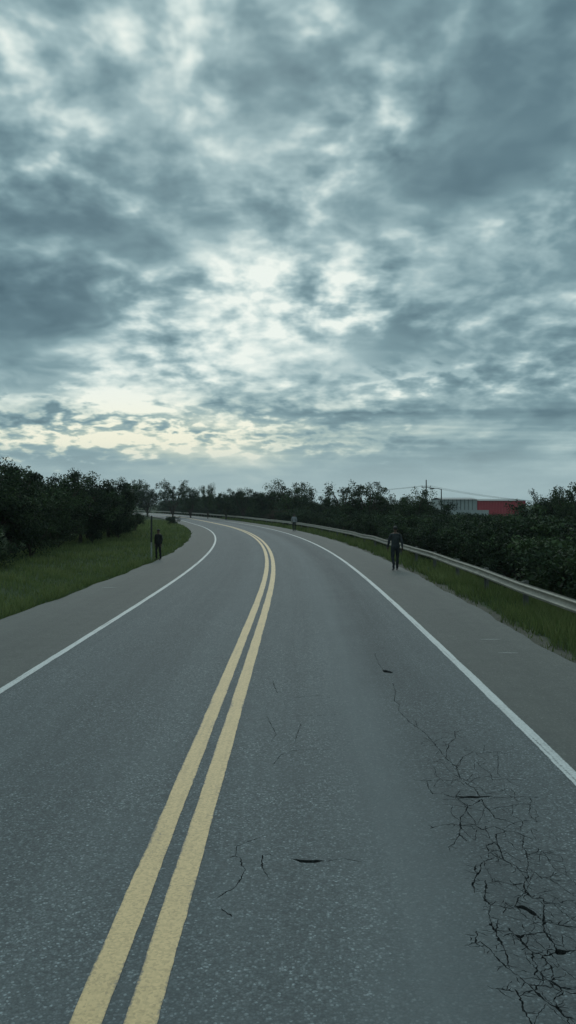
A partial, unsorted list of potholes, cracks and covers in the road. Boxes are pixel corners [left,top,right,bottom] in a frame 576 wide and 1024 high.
crack [392,683,576,1024]
crack [217,837,271,917]
